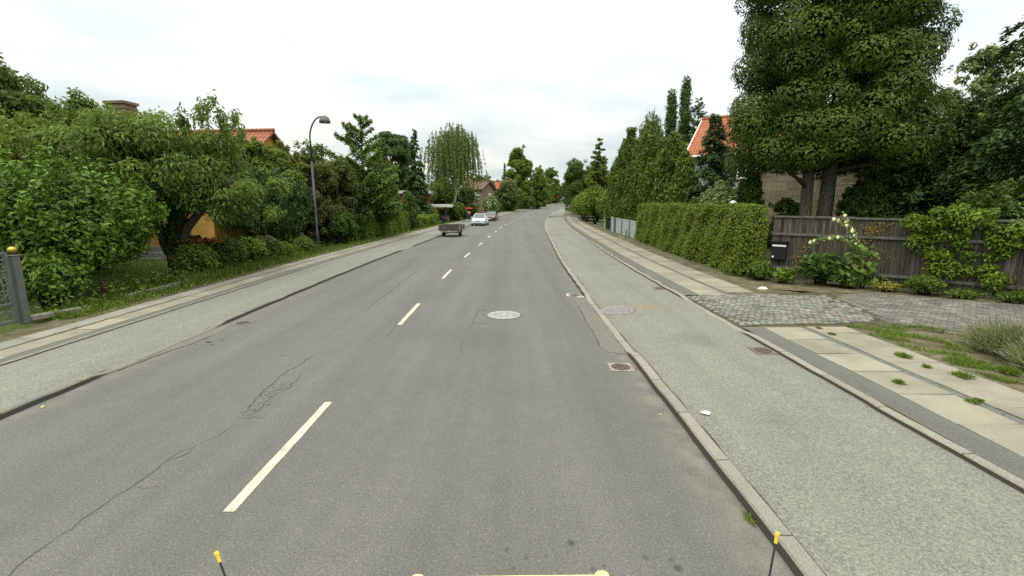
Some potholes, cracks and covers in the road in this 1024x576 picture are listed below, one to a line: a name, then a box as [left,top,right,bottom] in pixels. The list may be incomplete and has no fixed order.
manhole cover [600,306,636,315]
drain grate [607,363,636,372]
crack [240,355,310,418]
crack [8,428,230,576]
manhole cover [486,311,522,319]
